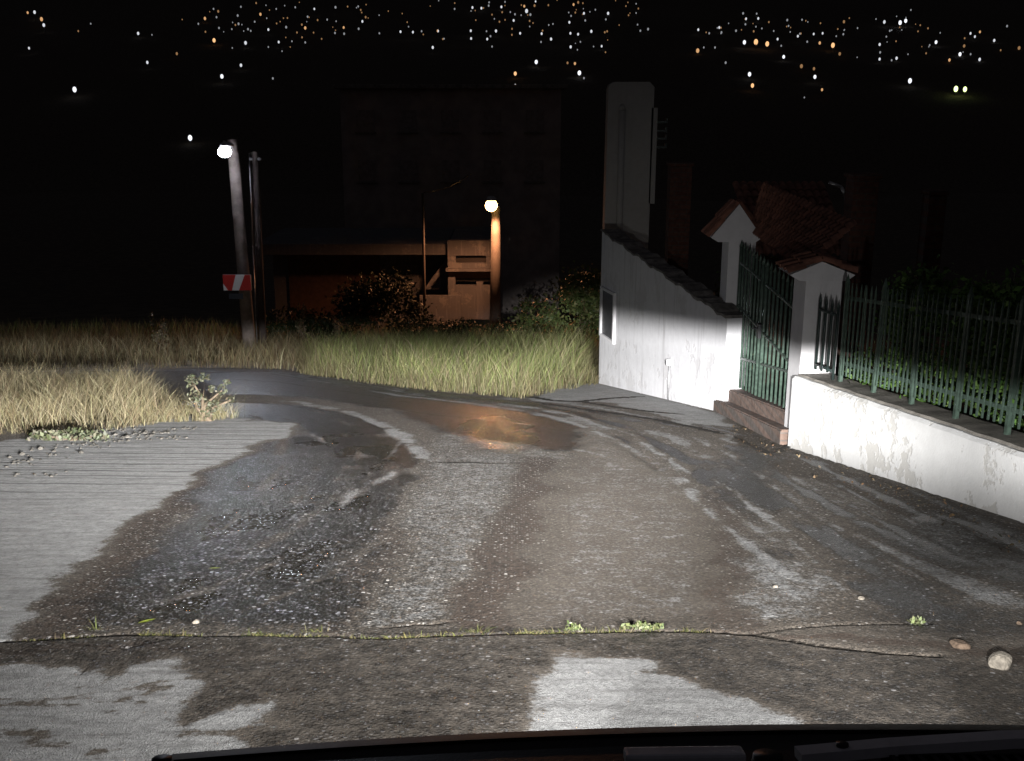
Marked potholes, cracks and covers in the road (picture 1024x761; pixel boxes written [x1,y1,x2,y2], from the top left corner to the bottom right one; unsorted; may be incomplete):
crack [0,624,930,674]
